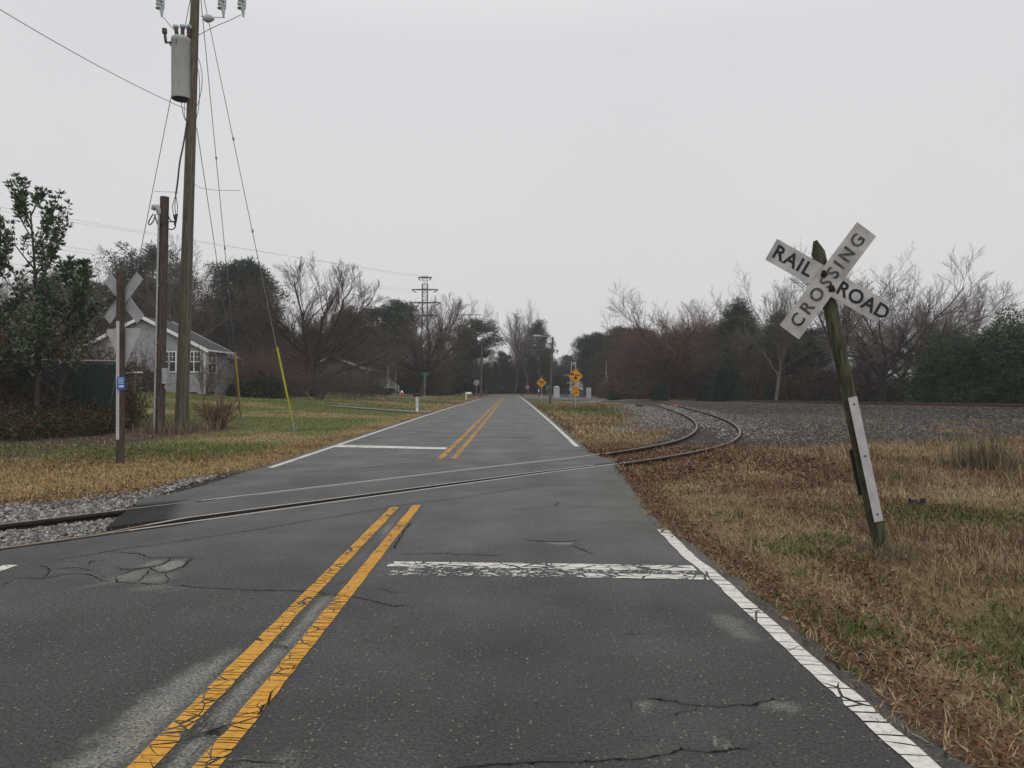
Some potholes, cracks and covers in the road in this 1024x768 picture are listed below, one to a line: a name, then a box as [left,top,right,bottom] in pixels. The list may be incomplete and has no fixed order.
crack [630,698,785,719]
crack [458,733,751,768]
crack [2,552,408,606]
